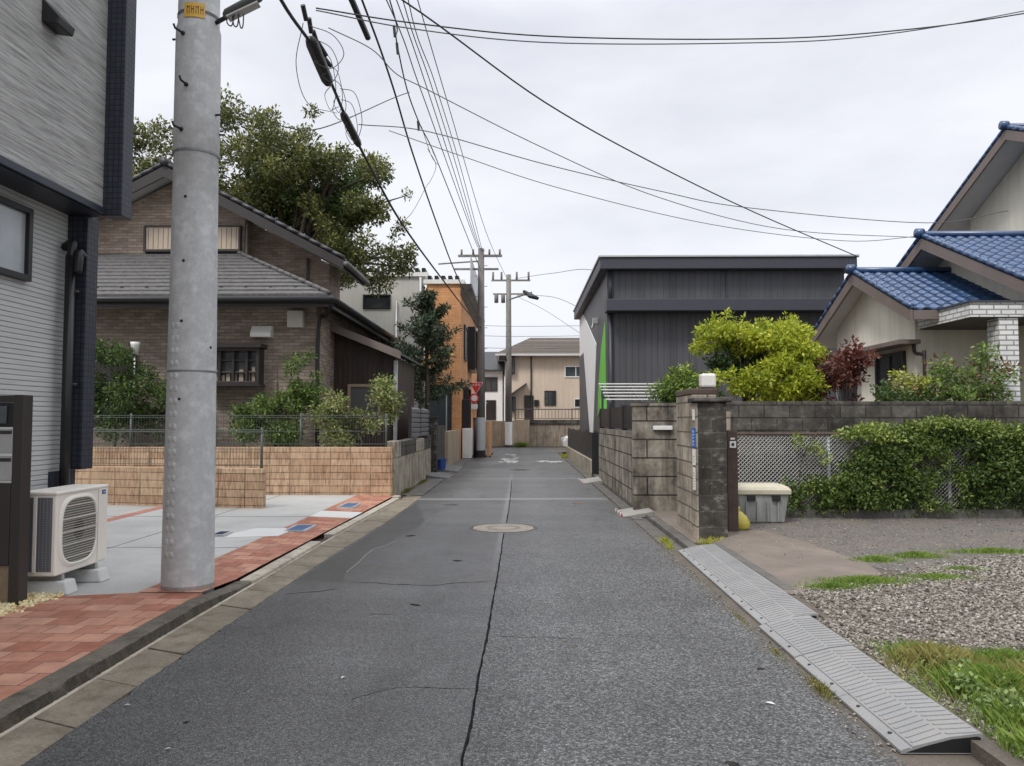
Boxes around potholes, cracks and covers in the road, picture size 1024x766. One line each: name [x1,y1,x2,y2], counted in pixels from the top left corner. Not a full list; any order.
crack [352,687,471,700]
manhole cover [469,523,538,533]
